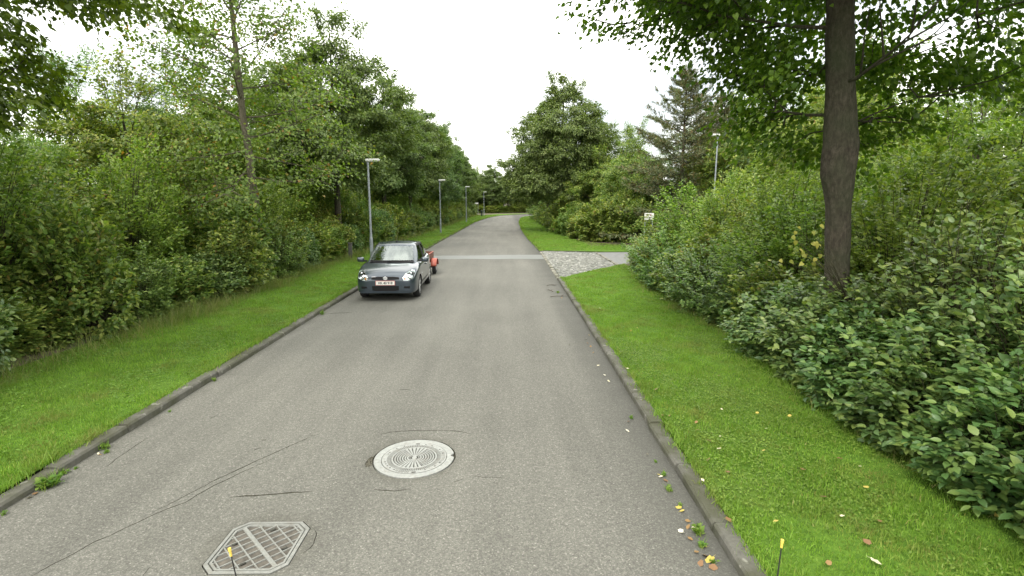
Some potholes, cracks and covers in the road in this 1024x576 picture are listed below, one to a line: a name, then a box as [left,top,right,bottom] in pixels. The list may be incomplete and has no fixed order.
manhole cover [372,440,456,479]
crack [34,436,314,575]
